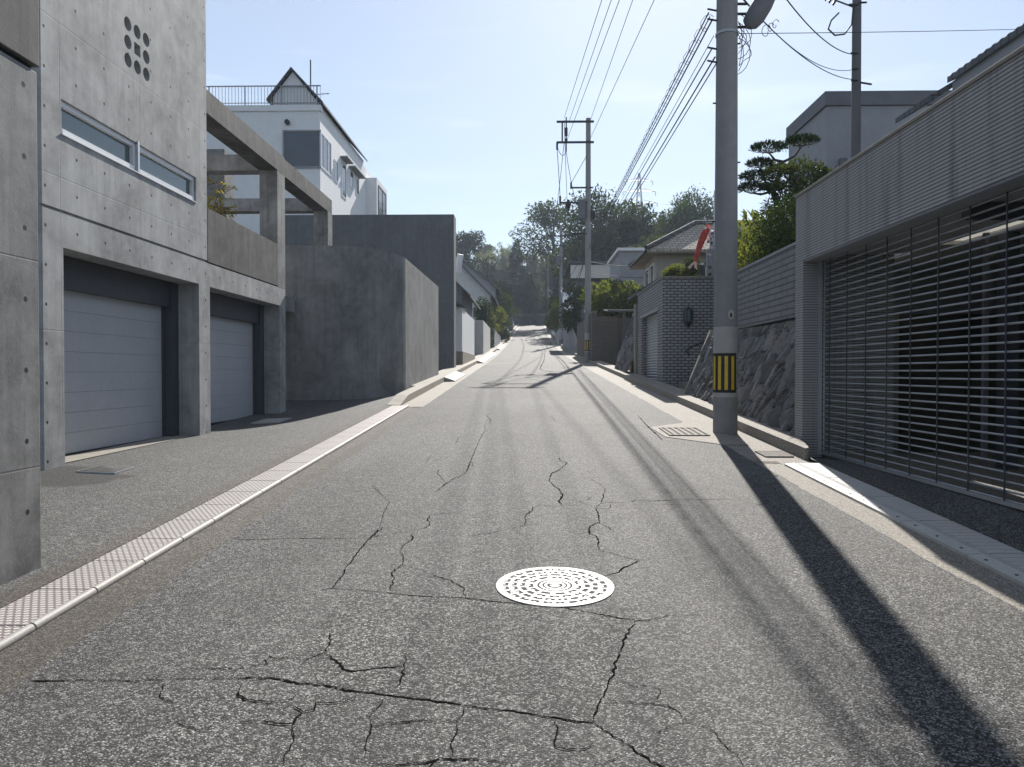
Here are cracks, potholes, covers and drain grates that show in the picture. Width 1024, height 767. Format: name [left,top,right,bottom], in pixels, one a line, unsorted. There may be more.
manhole cover [496,567,614,607]
crack [32,534,743,767]
drain grate [659,427,710,436]
crack [430,411,662,501]
utility cover [76,465,135,474]
crack [470,458,575,536]
